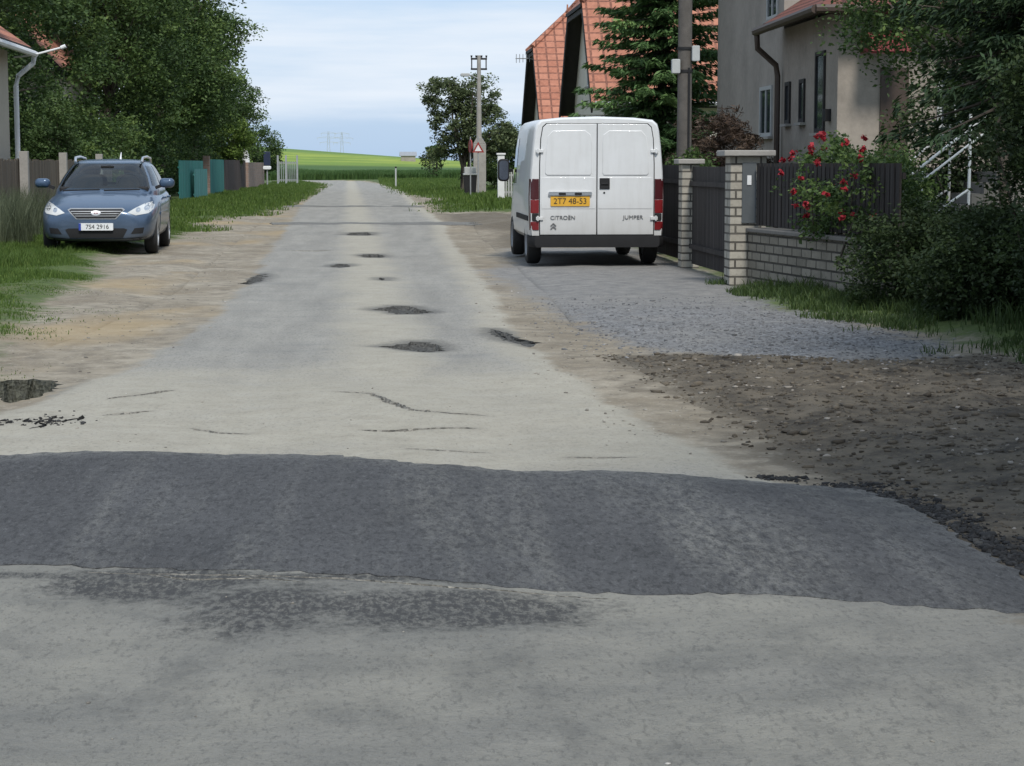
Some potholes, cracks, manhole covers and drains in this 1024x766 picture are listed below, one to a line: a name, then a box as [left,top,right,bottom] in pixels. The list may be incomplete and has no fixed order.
pothole [372,306,431,314]
pothole [240,274,268,284]
pothole [379,341,445,352]
crack [102,390,173,416]
crack [347,392,484,453]
pothole [0,379,64,403]
pothole [488,329,541,347]
